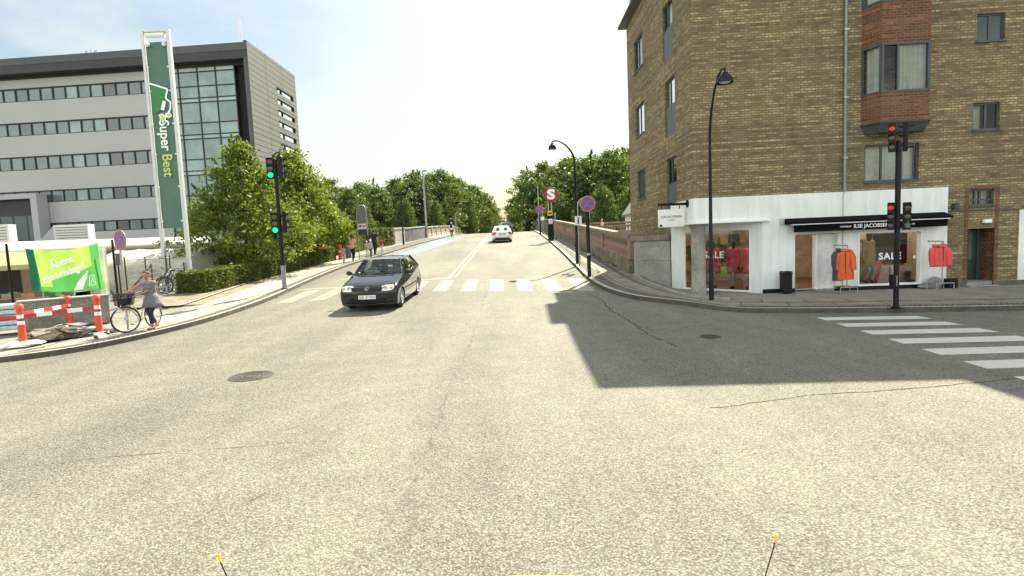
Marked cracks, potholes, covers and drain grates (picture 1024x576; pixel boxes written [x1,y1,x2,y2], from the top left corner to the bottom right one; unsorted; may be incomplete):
manhole cover [228,371,274,382]
crack [587,293,688,346]
crack [710,378,1014,408]
